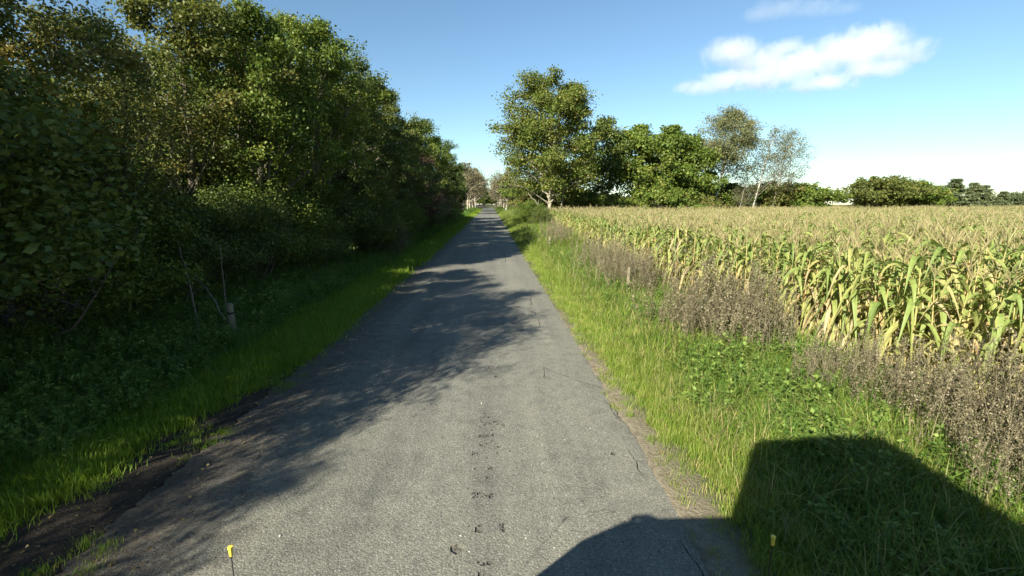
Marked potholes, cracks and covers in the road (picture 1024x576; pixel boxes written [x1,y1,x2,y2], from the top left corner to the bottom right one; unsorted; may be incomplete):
pothole [450,544,465,555]
crack [544,361,648,478]
